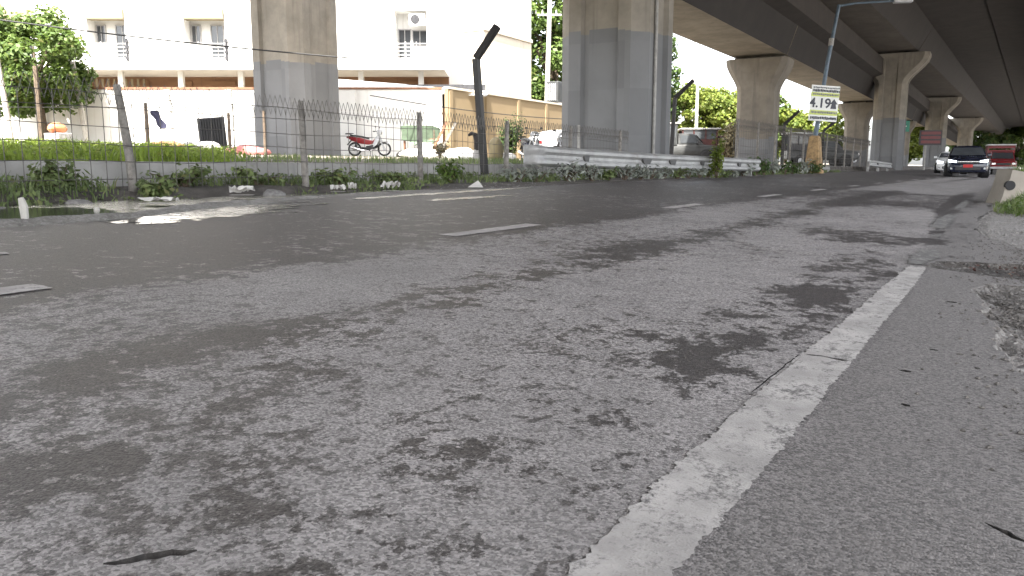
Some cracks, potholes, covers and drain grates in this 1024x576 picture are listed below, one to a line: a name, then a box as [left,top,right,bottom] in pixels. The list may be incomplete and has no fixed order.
crack [986,523,1024,542]
crack [751,355,798,392]
